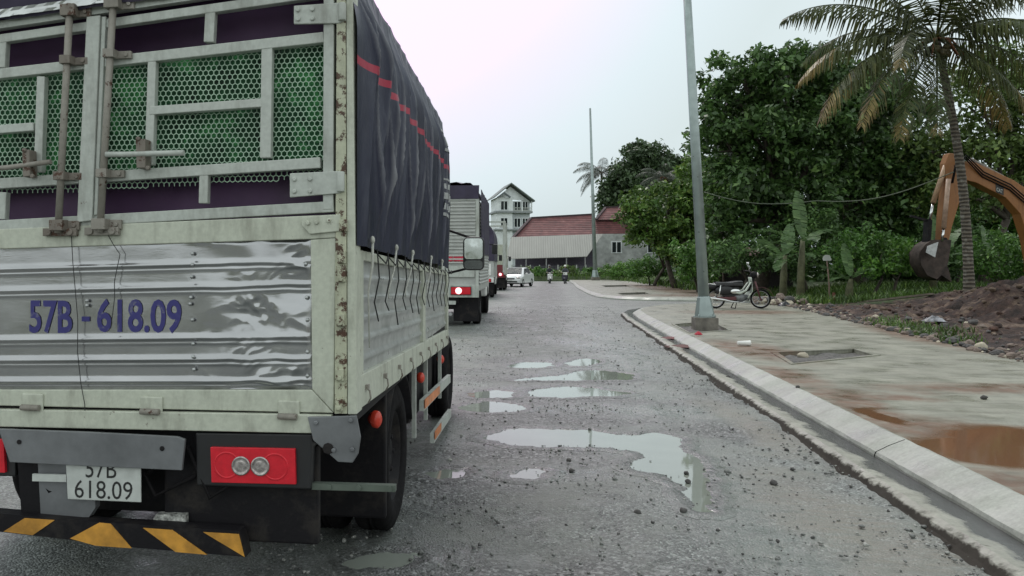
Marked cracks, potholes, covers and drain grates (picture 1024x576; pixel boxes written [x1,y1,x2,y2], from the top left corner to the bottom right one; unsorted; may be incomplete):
pothole [511,385,644,400]
pothole [450,399,541,415]
pothole [465,425,738,520]
pothole [406,464,487,484]
pothole [497,361,568,369]
pothole [503,369,646,382]
pothole [551,357,611,367]
pothole [455,388,530,400]
pothole [313,542,444,576]
